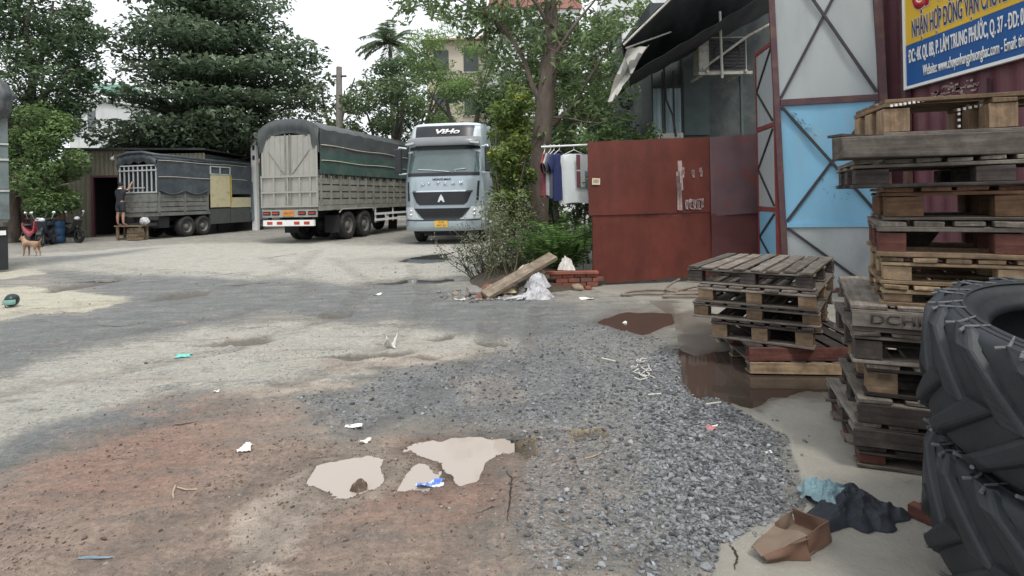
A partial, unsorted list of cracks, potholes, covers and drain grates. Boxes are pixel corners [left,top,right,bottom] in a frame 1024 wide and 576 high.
pothole [182,334,277,348]
crack [473,474,513,521]
pothole [400,433,519,486]
pothole [300,453,389,499]
pothole [398,252,452,264]
pothole [392,459,445,493]
pothole [142,290,216,302]
